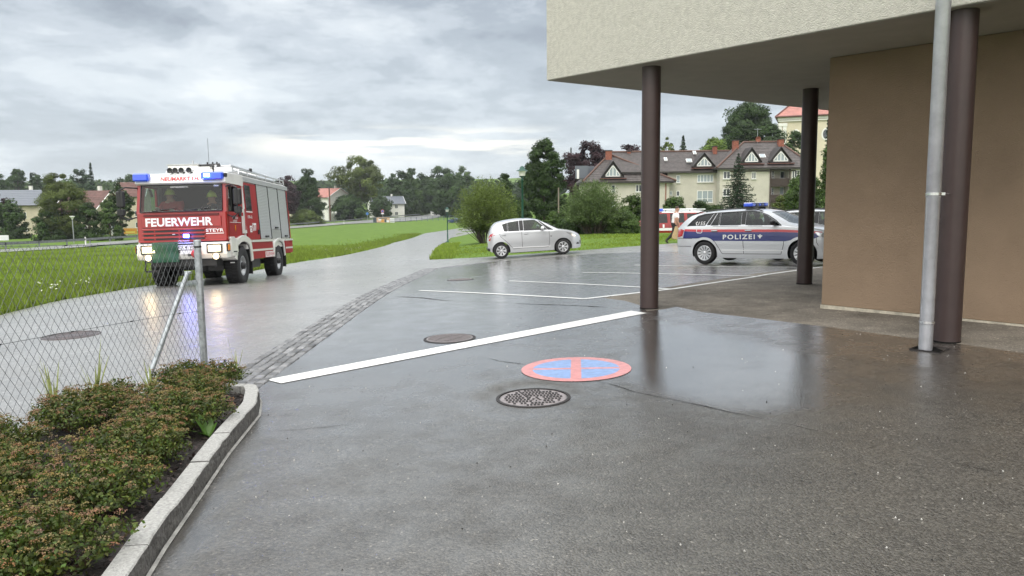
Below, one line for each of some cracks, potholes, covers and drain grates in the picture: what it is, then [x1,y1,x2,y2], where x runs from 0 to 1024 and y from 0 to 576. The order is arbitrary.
manhole cover [423,333,476,343]
crack [596,380,758,418]
manhole cover [40,330,102,340]
